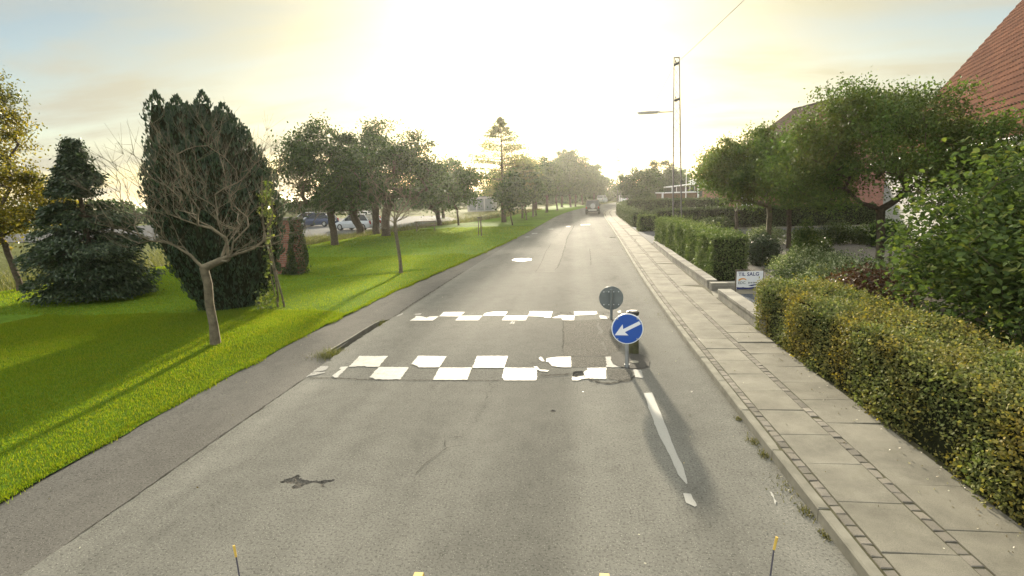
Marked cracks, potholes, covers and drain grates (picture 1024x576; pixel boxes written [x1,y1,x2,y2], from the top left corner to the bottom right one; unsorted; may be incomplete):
pothole [280,475,335,489]
